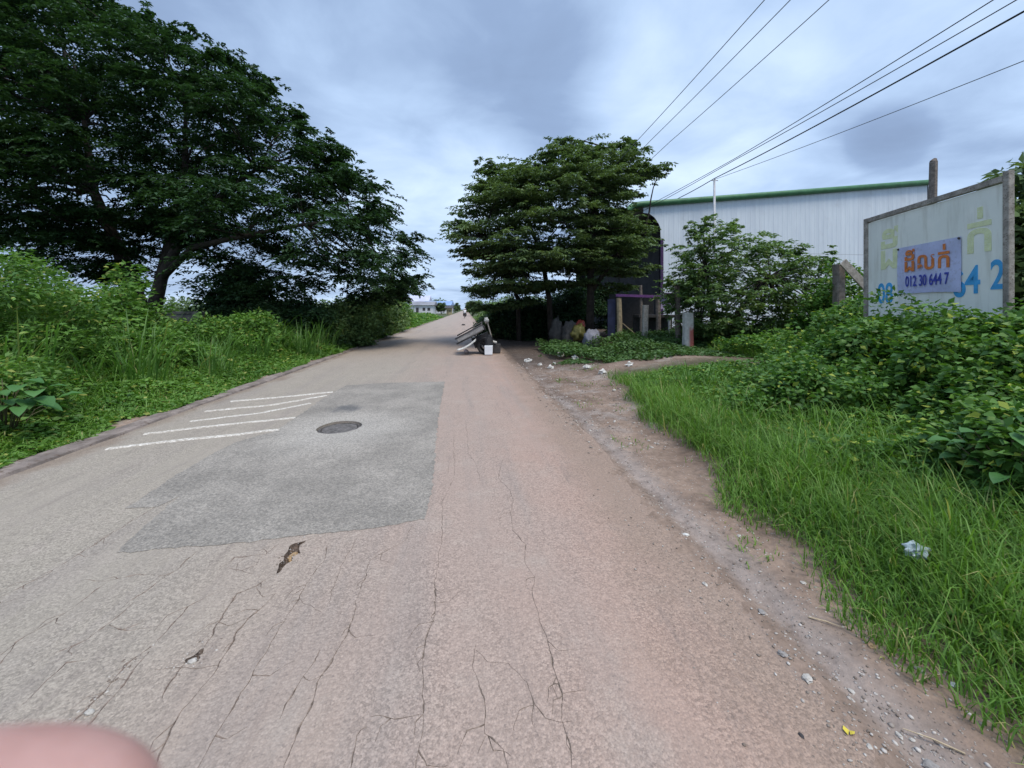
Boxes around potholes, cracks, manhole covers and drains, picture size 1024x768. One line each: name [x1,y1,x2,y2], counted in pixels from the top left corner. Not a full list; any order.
pothole [277,541,305,573]
crack [457,463,581,767]
crack [351,424,480,768]
crack [0,526,412,768]
manhole cover [317,423,361,434]
